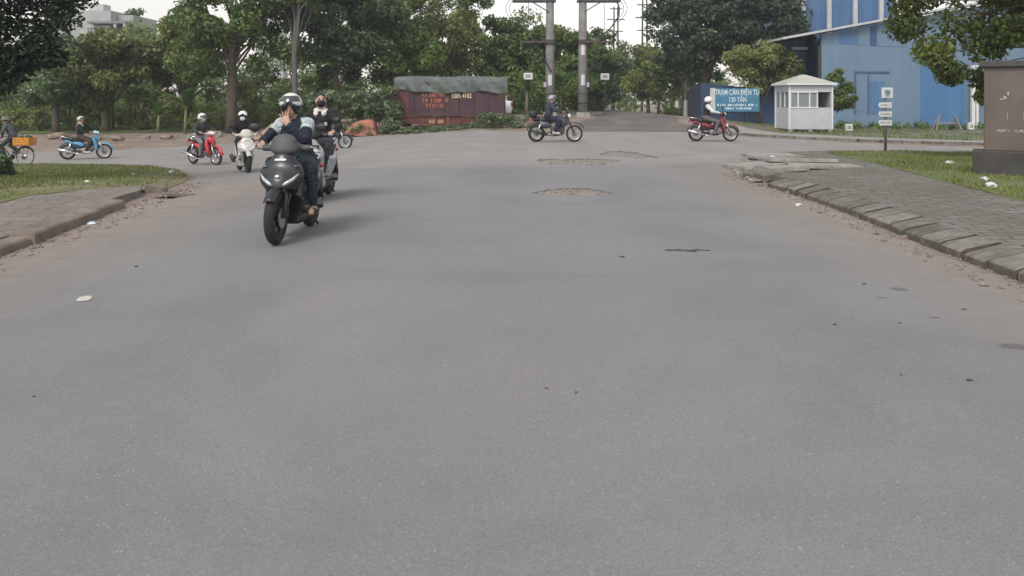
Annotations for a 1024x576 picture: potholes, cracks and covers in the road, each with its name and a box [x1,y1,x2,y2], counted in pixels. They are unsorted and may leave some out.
pothole [601,151,658,159]
pothole [532,188,614,196]
